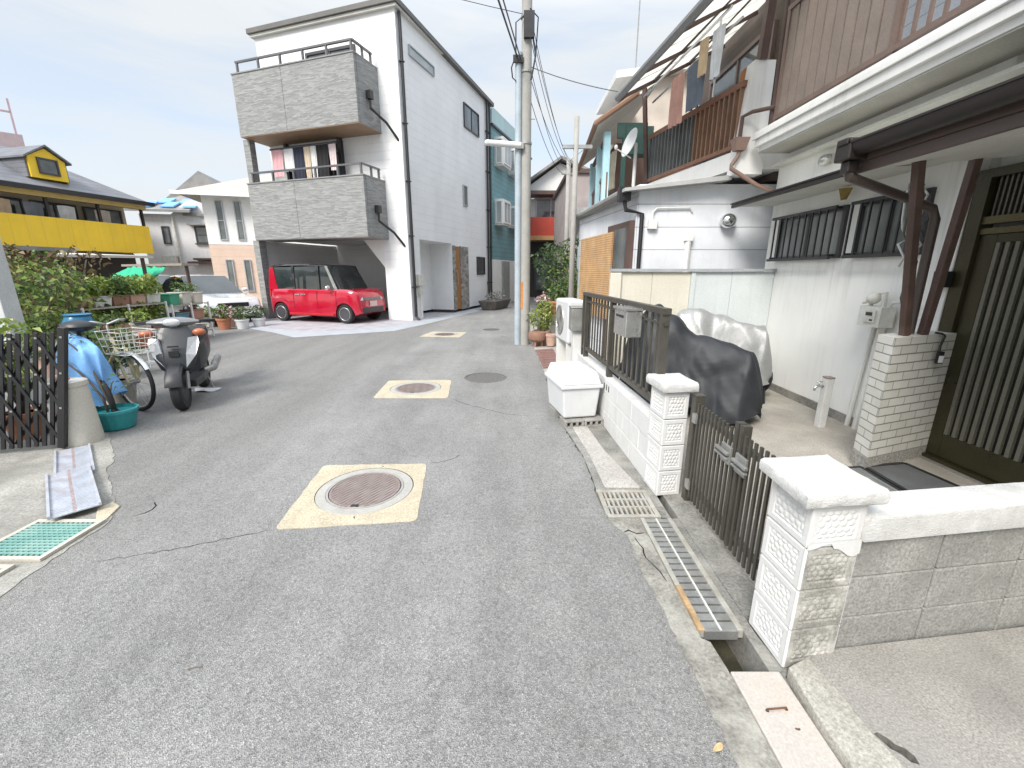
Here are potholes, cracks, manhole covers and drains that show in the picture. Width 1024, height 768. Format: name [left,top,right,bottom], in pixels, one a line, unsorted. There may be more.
drain grate [640,518,744,640]
drain grate [596,490,661,519]
crack [94,530,269,563]
manhole cover [277,464,426,530]
drain grate [0,519,106,562]
crack [624,529,667,581]
manhole cover [374,380,451,398]
manhole cover [464,372,507,383]
